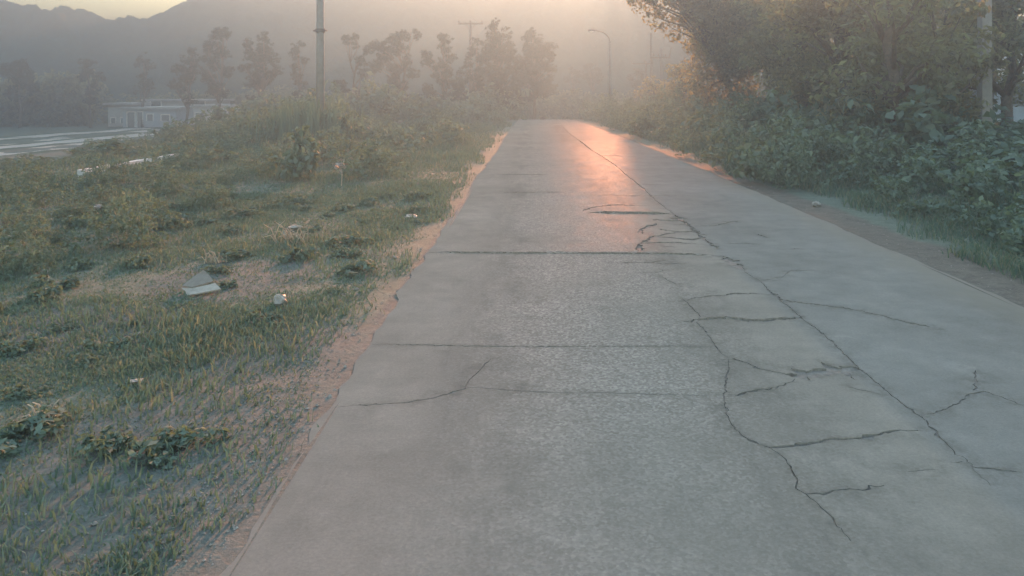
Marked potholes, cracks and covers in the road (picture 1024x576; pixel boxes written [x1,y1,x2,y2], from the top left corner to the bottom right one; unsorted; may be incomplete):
crack [583,184,1023,541]
crack [339,360,704,407]
